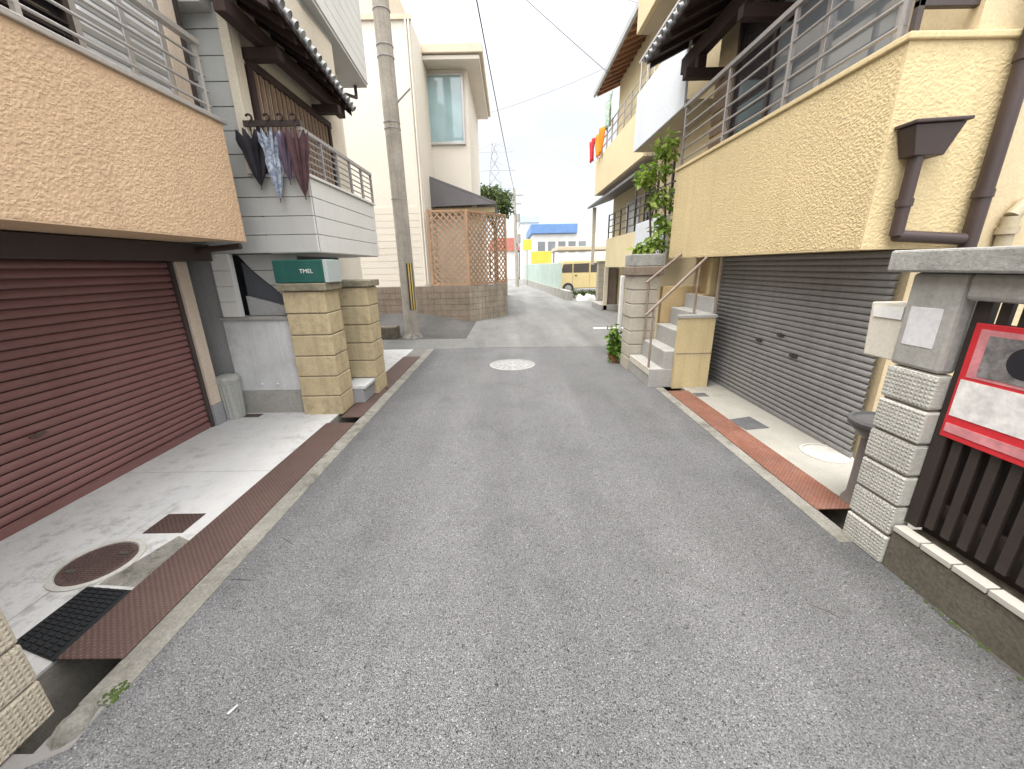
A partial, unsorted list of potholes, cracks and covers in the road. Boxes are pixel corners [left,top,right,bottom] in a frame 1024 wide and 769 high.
manhole cover [44,538,147,592]
manhole cover [799,443,854,464]
manhole cover [490,359,535,371]
